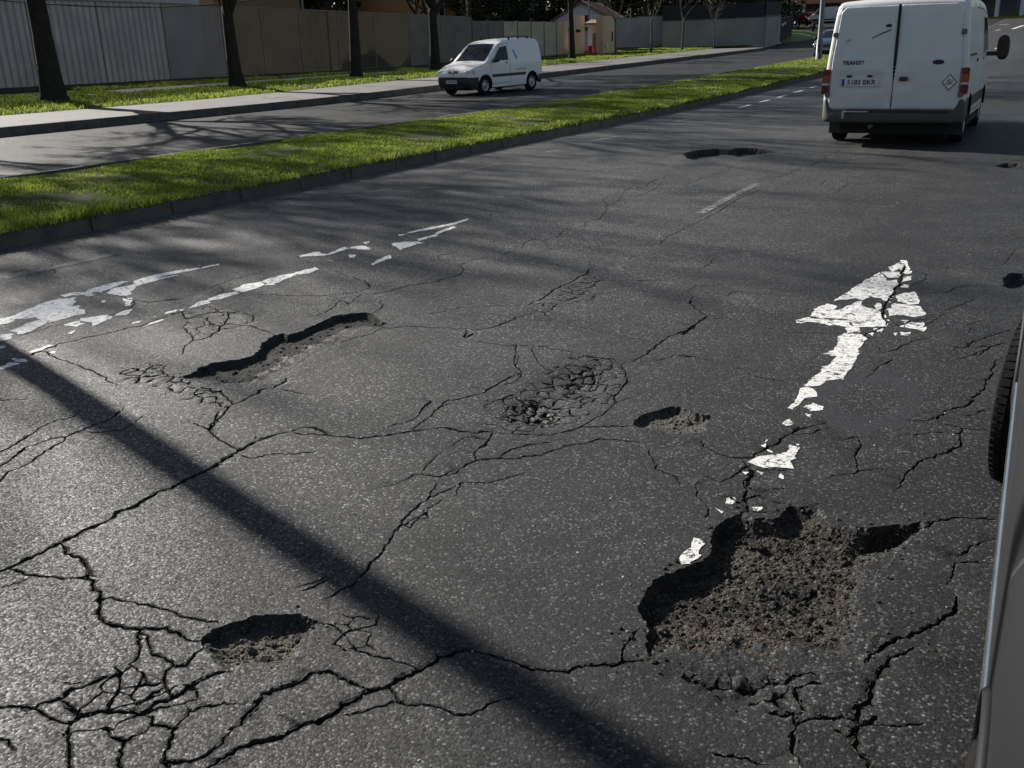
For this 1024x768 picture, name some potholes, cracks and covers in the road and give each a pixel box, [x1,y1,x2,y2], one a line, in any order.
crack [0,250,1012,768]
pothole [1002,273,1024,289]
pothole [178,312,388,392]
pothole [633,406,713,437]
pothole [606,499,935,709]
pothole [186,604,329,673]
pothole [683,148,774,160]
